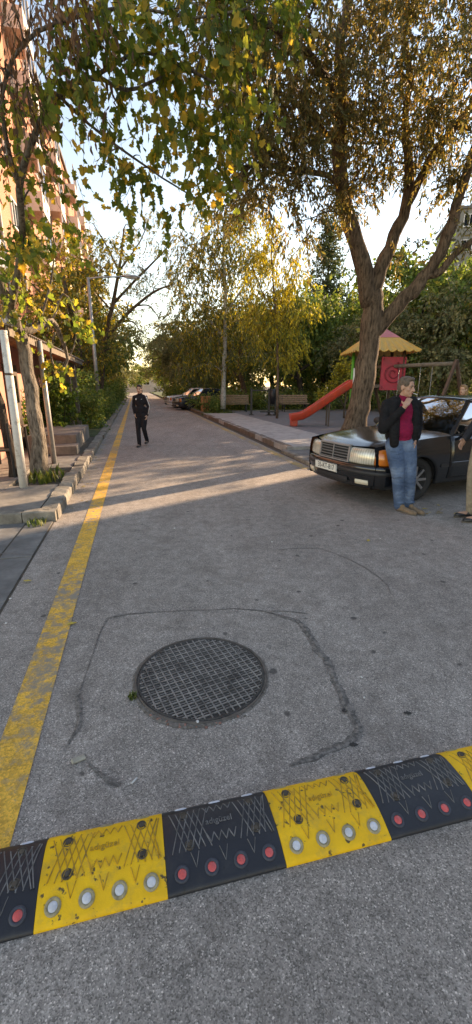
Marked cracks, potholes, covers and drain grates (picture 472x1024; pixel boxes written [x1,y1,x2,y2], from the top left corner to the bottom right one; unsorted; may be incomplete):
manhole cover [132,637,269,729]
crack [271,548,391,594]
